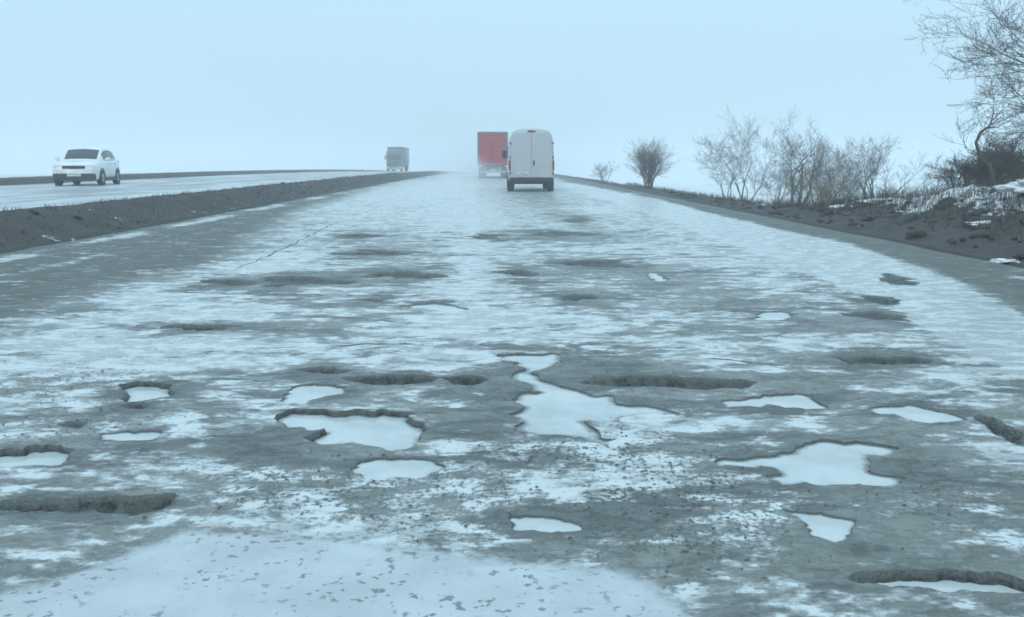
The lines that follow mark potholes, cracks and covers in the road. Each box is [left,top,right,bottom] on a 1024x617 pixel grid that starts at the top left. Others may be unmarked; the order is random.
pothole [844,568,1024,593]
pothole [576,375,758,390]
pothole [118,381,177,402]
crack [232,222,337,271]
pothole [259,276,358,287]
pothole [438,374,489,385]
pothole [280,383,347,405]
pothole [721,393,829,409]
pothole [350,457,446,480]
pothole [0,444,75,467]
pothole [496,353,680,443]
pothole [99,430,163,441]
